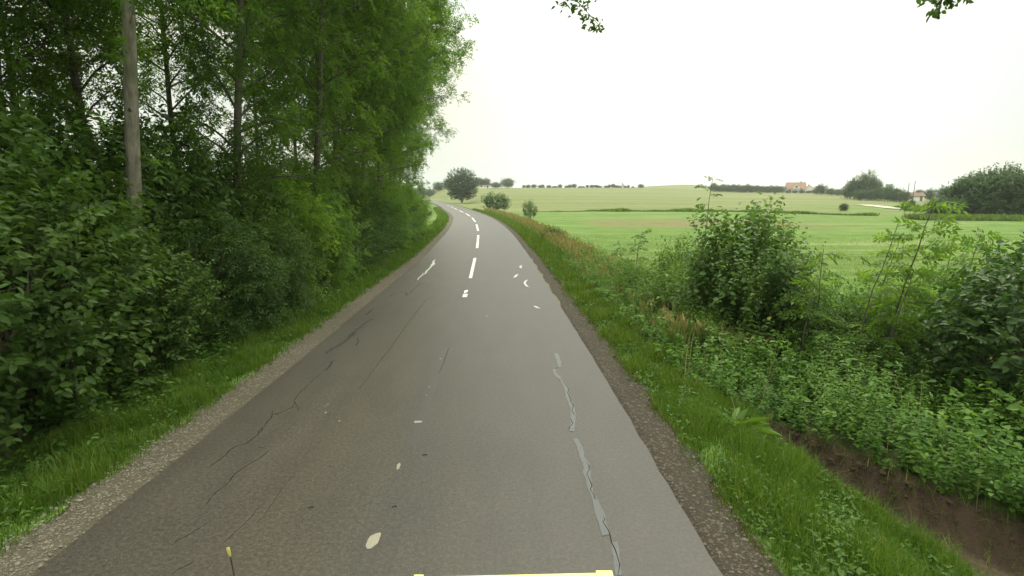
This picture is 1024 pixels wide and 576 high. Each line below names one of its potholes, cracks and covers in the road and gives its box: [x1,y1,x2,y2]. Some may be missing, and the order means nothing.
crack [207,374,320,503]
